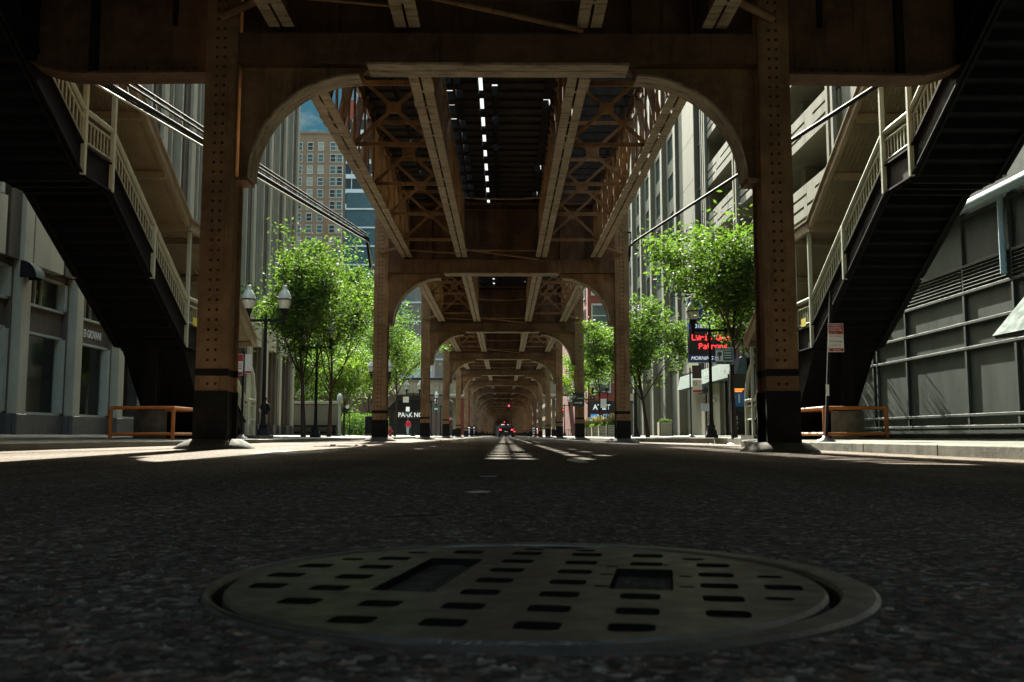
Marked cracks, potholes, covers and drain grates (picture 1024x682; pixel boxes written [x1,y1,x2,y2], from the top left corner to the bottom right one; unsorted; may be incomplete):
manhole cover [201,543,882,656]
